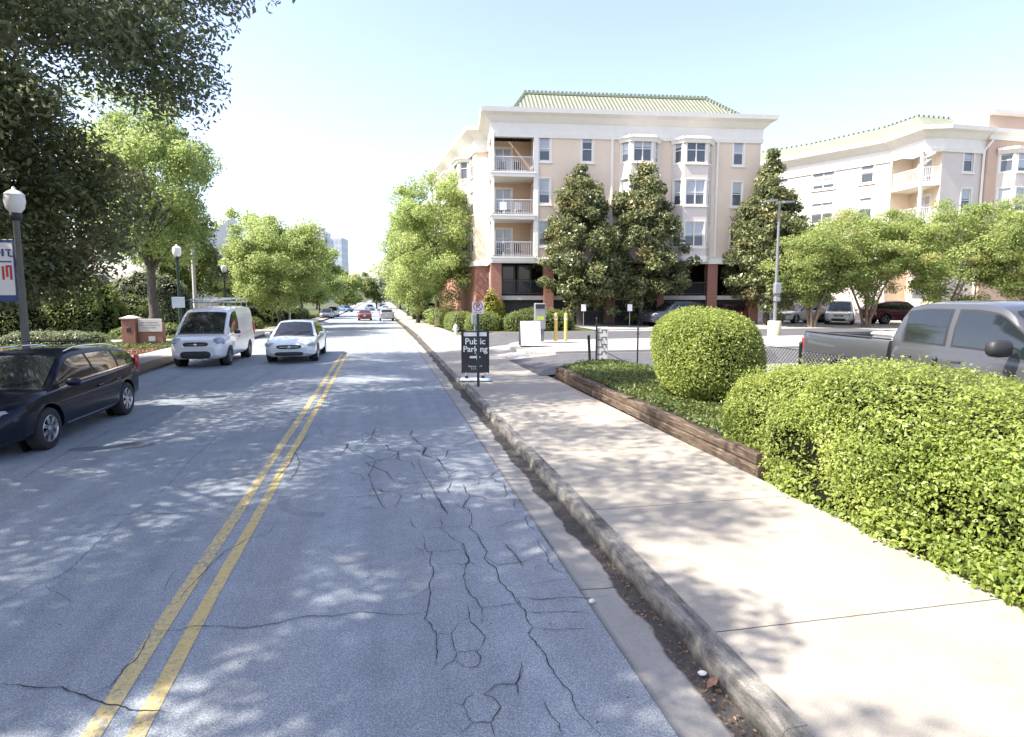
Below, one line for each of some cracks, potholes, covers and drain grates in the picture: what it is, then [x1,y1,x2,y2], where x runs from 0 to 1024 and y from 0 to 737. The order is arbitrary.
crack [4,428,603,736]
